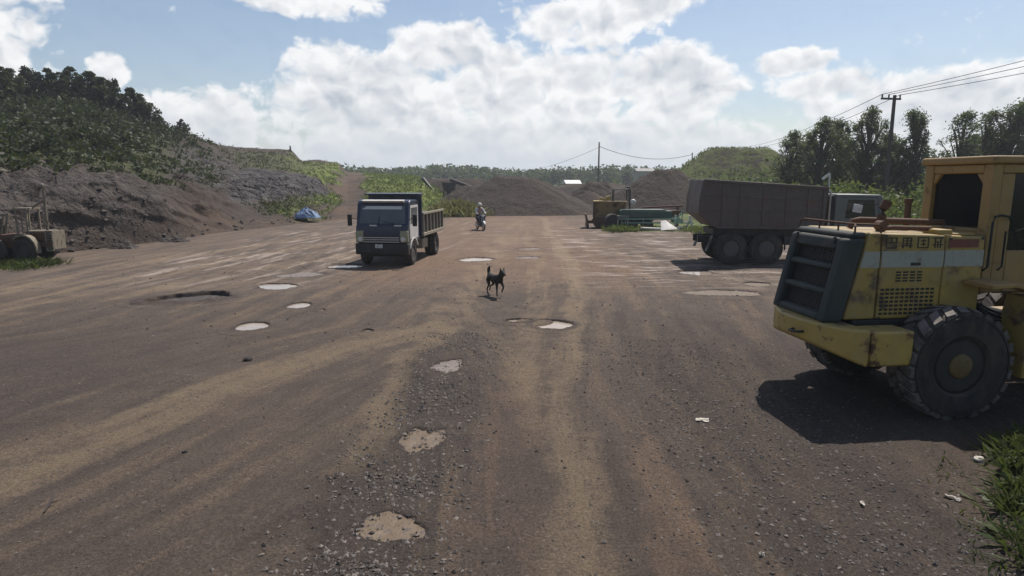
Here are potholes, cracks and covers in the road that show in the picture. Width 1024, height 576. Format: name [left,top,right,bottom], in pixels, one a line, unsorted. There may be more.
pothole [514,316,591,334]
pothole [216,318,287,336]
pothole [112,289,265,309]
pothole [442,255,509,264]
